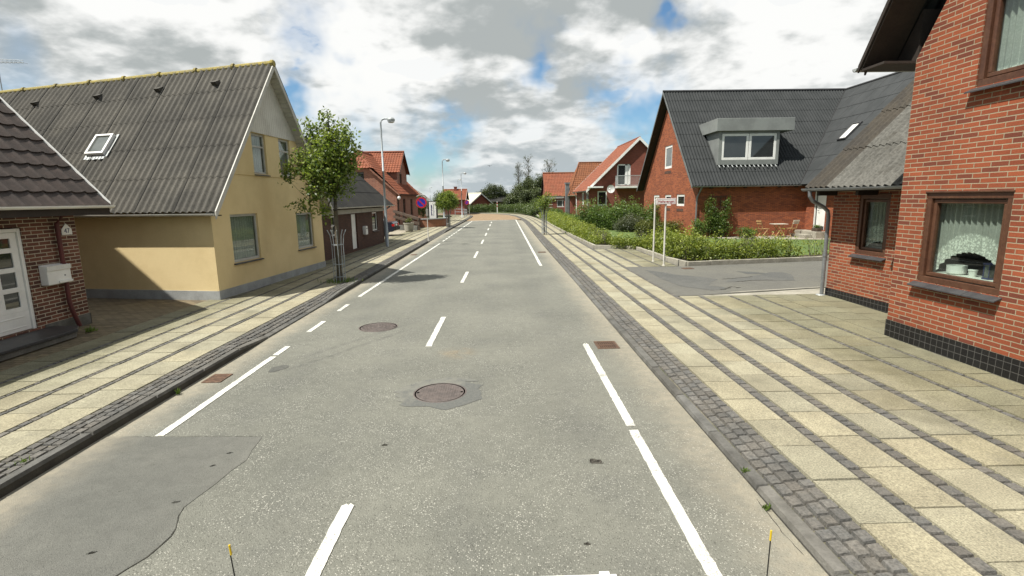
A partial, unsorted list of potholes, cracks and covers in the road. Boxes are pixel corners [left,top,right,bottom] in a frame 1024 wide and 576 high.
drain grate [593,341,620,349]
manhole cover [358,322,398,332]
drain grate [201,374,233,383]
manhole cover [413,383,467,403]
